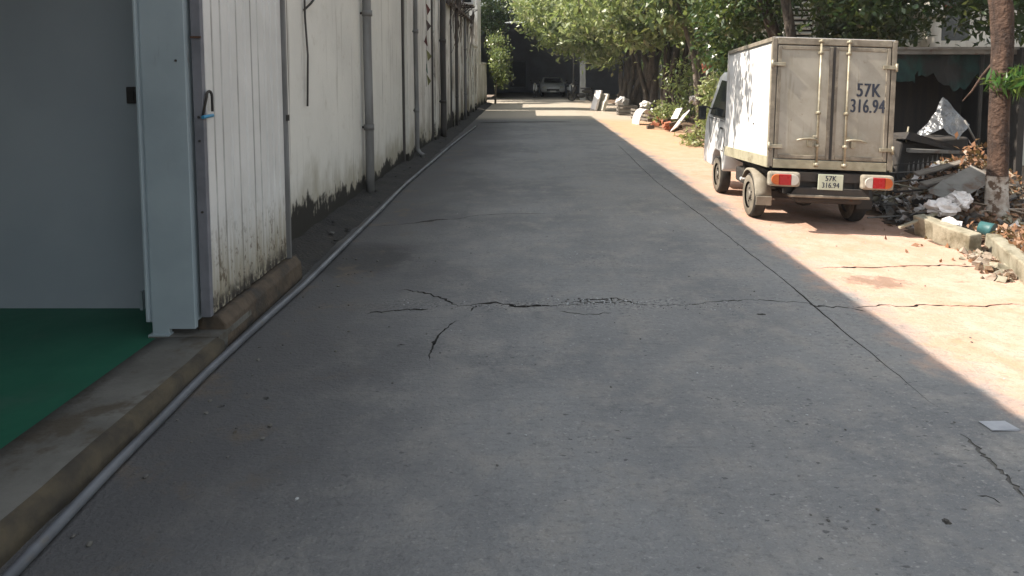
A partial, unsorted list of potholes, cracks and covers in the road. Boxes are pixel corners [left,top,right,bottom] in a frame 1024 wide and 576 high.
crack [383,213,540,226]
crack [961,434,1024,504]
crack [368,289,1018,315]
crack [428,321,455,362]
